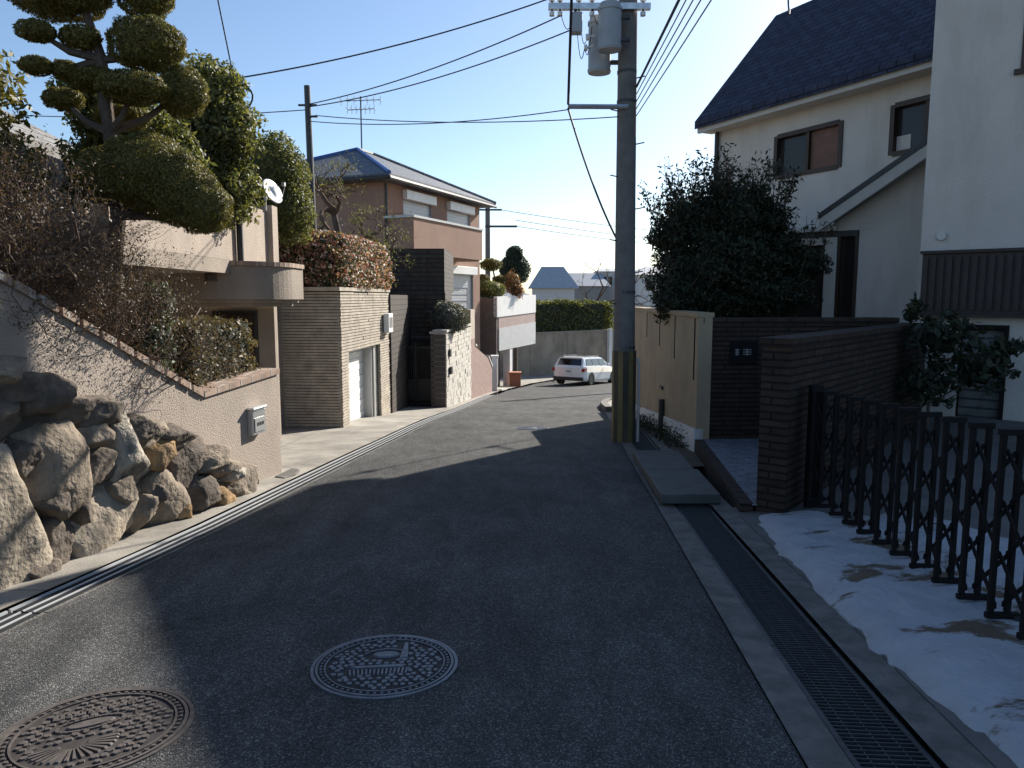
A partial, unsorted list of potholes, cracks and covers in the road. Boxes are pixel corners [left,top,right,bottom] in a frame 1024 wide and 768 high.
drain grate [674,504,713,512]
manhole cover [310,634,458,700]
manhole cover [0,687,194,768]
drain grate [679,511,756,561]
drain grate [347,438,399,456]
drain grate [712,559,833,648]
drain grate [0,611,46,636]
drain grate [198,482,310,528]
drain grate [771,646,941,768]
drain grate [8,526,224,614]
drain grate [290,455,364,483]
